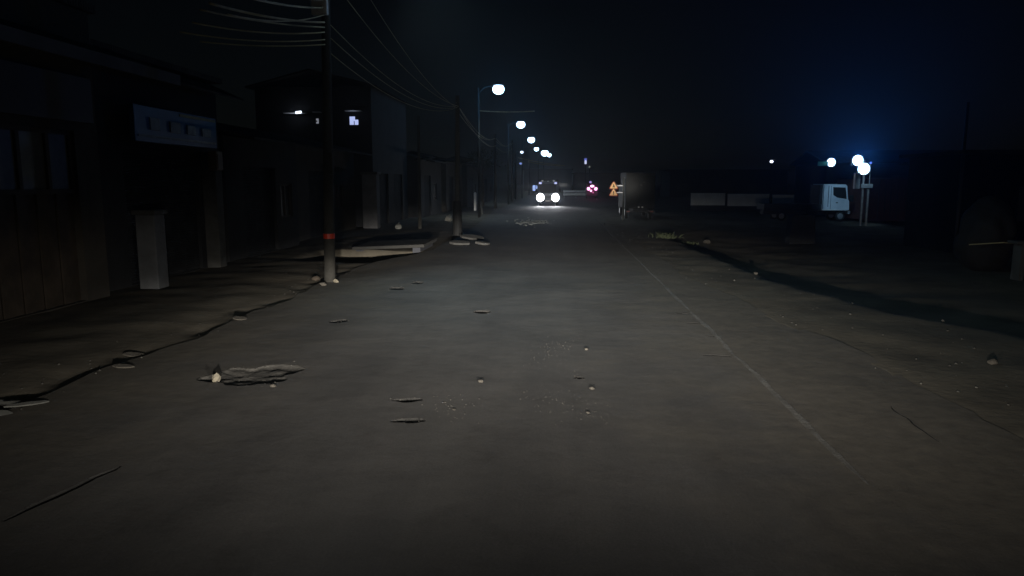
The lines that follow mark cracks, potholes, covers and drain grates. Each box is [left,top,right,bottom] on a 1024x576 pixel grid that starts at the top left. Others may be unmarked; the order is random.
crack [891,407,939,442]
crack [2,466,120,521]
pothole [196,364,306,386]
